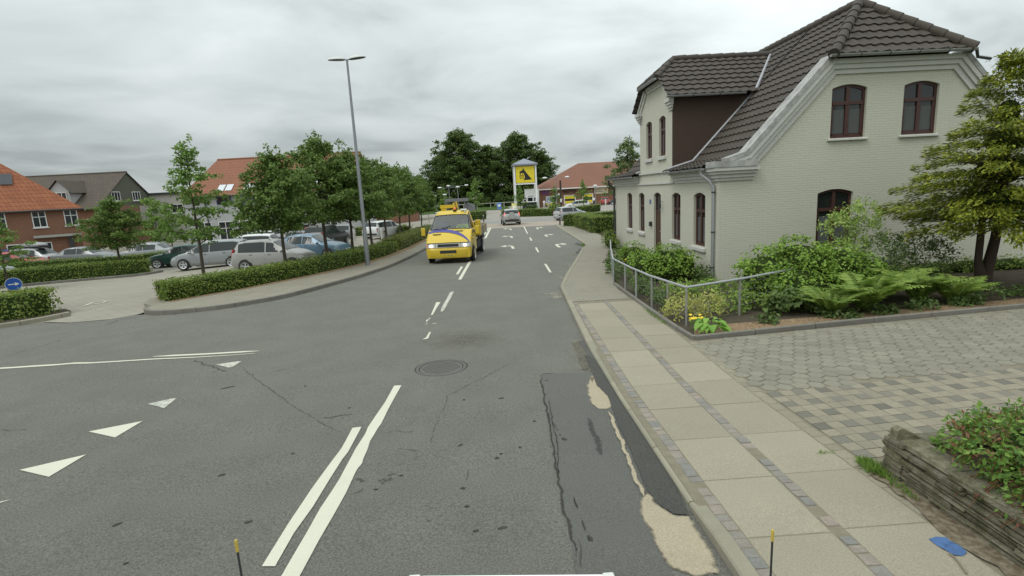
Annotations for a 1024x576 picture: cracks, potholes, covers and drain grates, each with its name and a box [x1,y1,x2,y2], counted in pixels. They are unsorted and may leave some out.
manhole cover [415,360,467,376]
